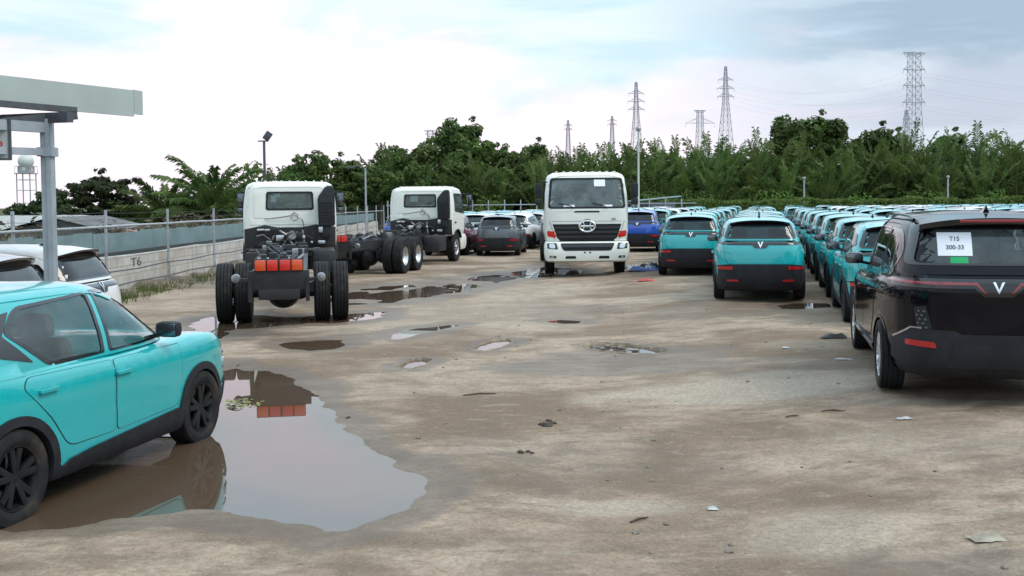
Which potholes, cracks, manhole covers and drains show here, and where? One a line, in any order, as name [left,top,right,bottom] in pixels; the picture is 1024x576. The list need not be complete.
pothole [395,357,433,369]
pothole [470,338,514,352]
pothole [579,342,667,354]
